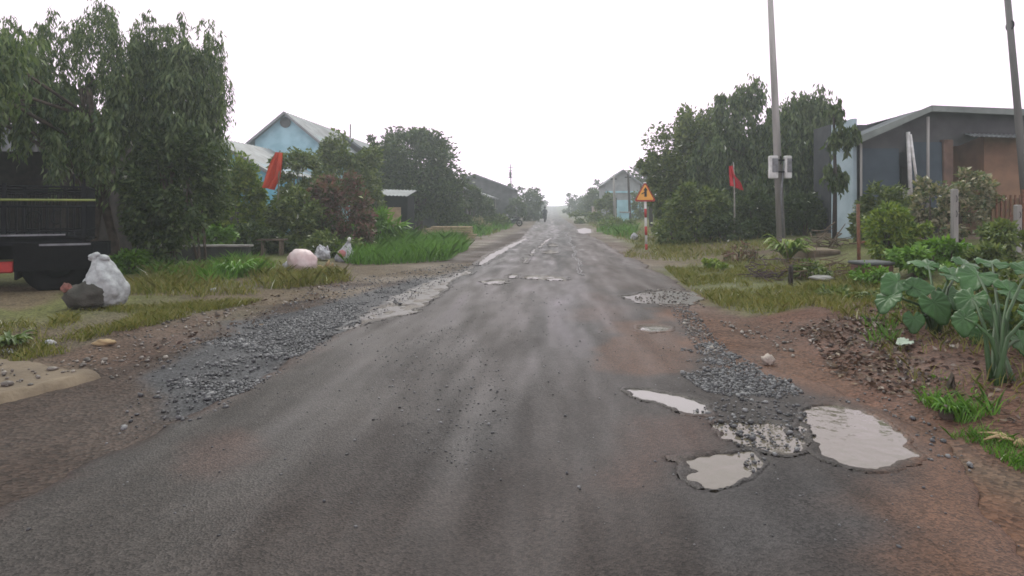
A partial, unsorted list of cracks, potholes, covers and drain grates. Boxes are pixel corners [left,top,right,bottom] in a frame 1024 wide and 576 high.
pothole [708,418,816,458]
pothole [665,447,770,492]
pothole [633,323,676,333]
pothole [620,387,718,418]
pothole [619,290,705,306]
pothole [783,398,928,474]
crack [565,232,585,276]
pothole [337,267,476,331]
